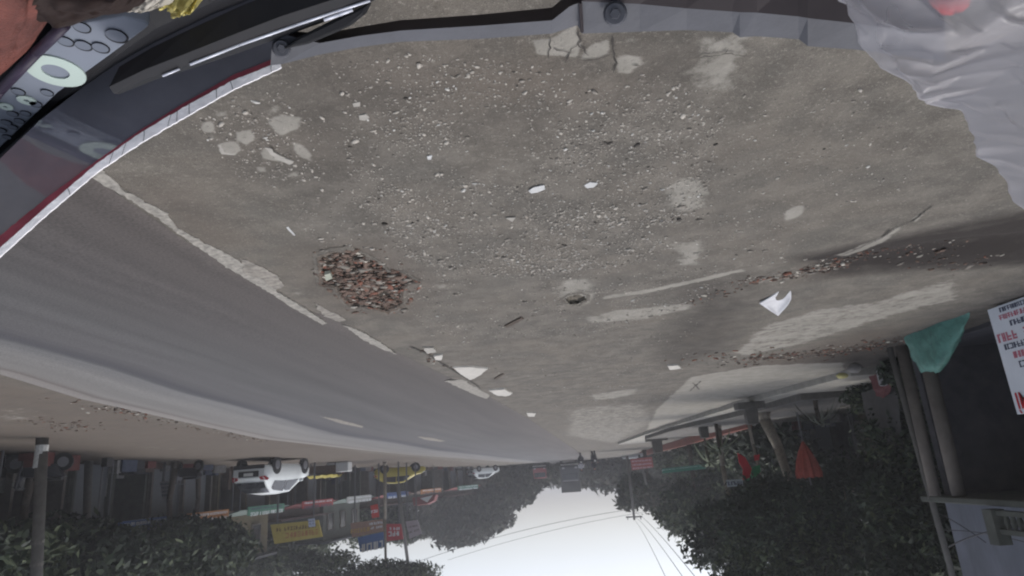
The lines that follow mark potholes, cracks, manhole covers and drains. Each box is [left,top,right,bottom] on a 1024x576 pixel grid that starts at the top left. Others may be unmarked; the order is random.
pothole [311,246,421,314]
pothole [560,292,590,307]
crack [841,207,931,256]
crack [548,32,640,73]
